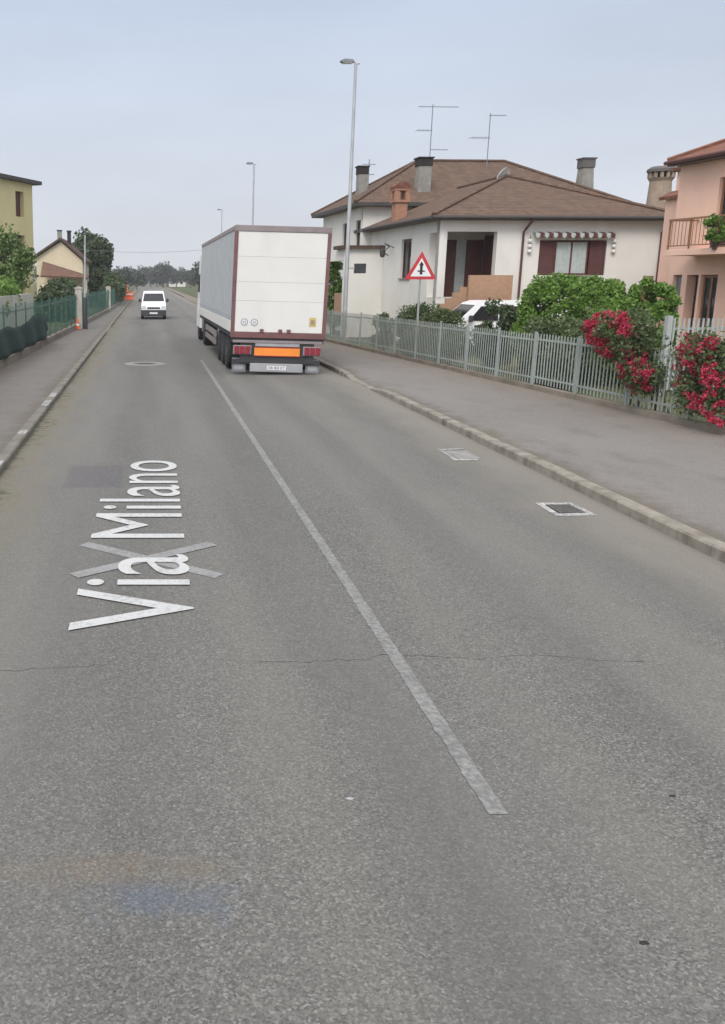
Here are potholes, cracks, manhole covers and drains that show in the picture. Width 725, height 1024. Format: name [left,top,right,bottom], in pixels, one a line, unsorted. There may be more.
crack [257,654,645,663]
utility cover [438,448,481,460]
drain grate [536,502,596,516]
